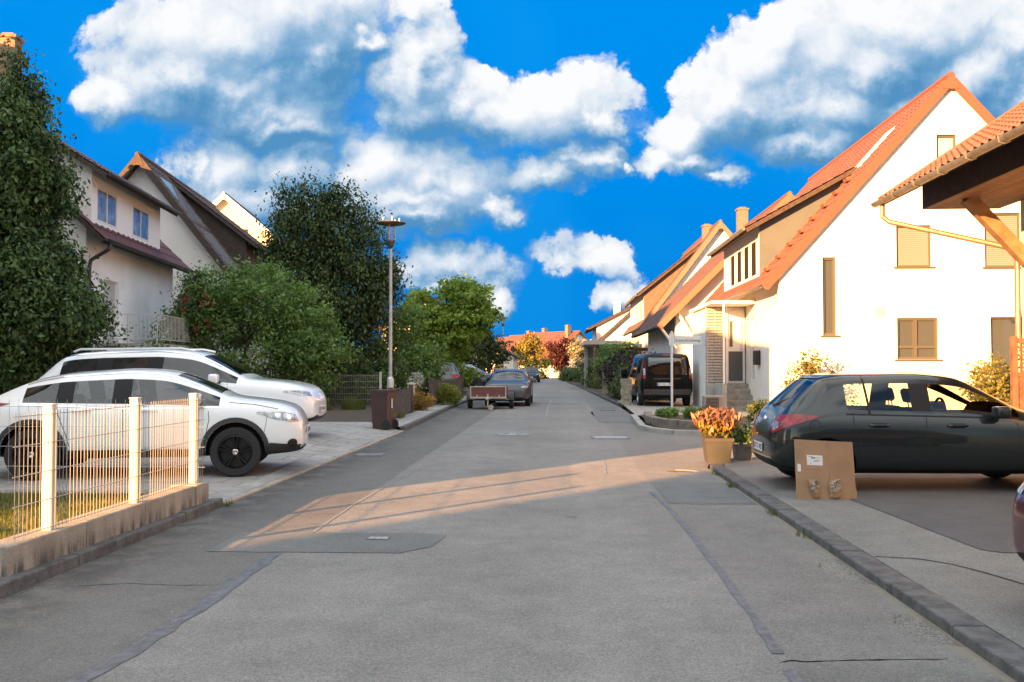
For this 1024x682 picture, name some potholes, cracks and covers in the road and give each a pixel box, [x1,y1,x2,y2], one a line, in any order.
crack [877,556,1024,584]
